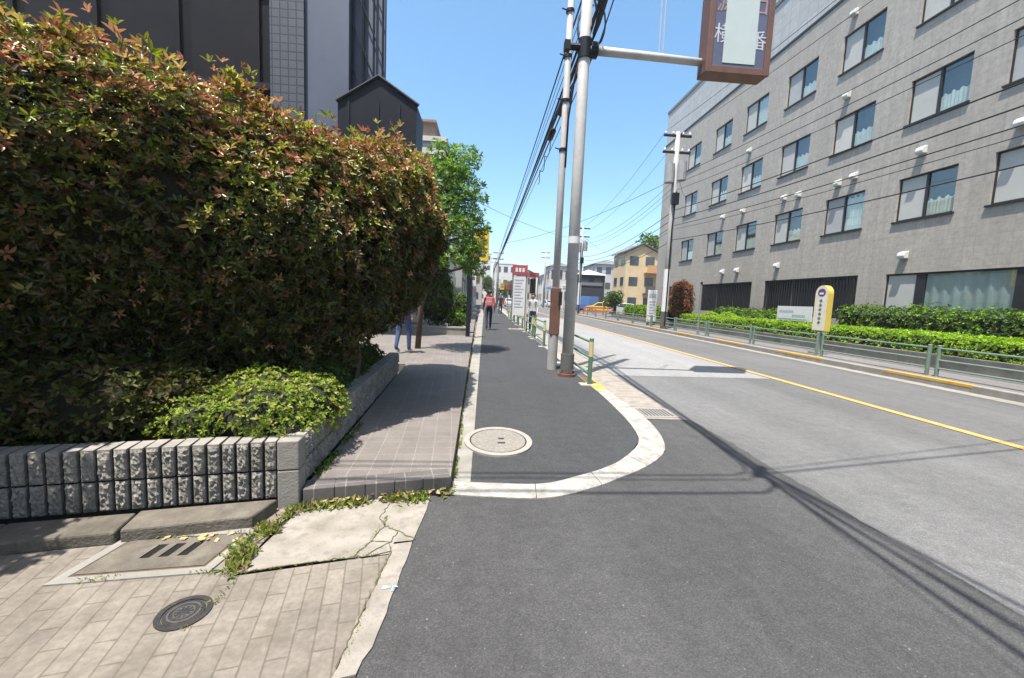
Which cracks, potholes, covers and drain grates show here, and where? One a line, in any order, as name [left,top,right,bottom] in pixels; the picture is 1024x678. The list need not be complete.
crack [231,503,415,668]
drain grate [631,407,681,418]
manhole cover [464,427,532,457]
utility cover [153,595,213,632]
drain grate [43,528,258,587]
